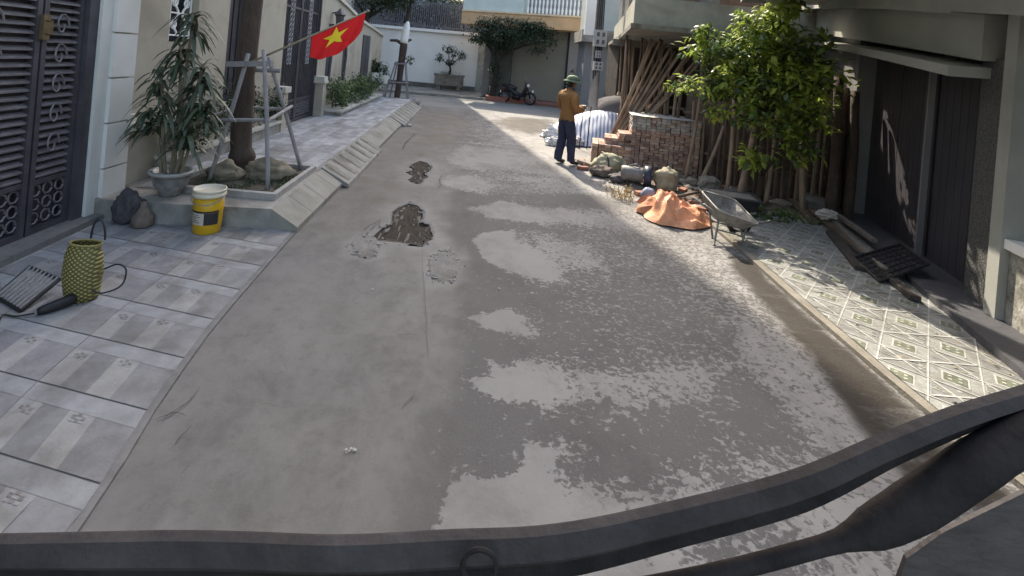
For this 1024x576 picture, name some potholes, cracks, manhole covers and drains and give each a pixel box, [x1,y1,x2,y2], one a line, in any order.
crack [159,388,199,445]
pothole [406,161,431,184]
pothole [374,203,434,246]
